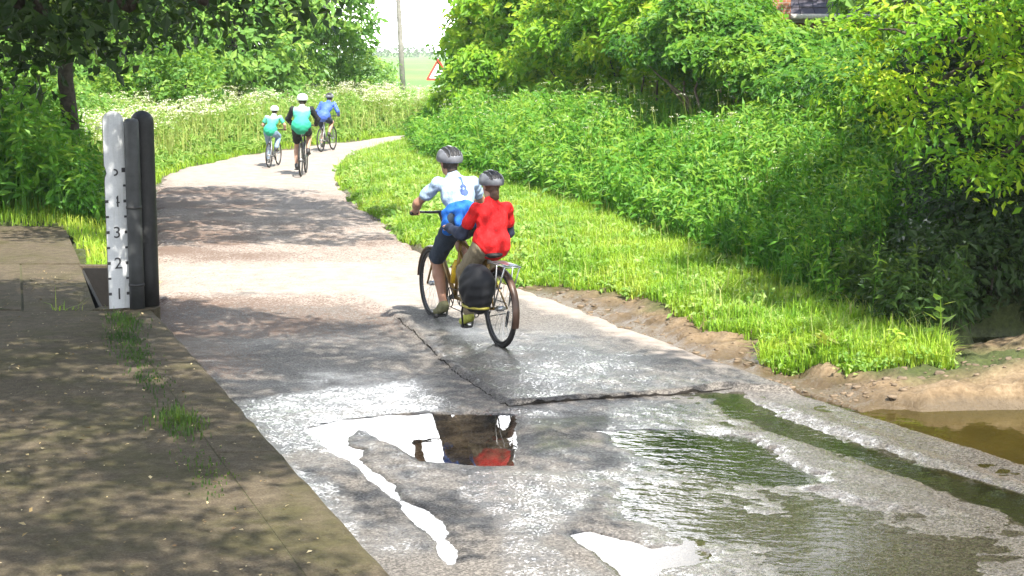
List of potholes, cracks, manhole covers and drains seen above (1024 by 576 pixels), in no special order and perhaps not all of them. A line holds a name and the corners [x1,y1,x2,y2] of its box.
crack [396,317,734,406]
